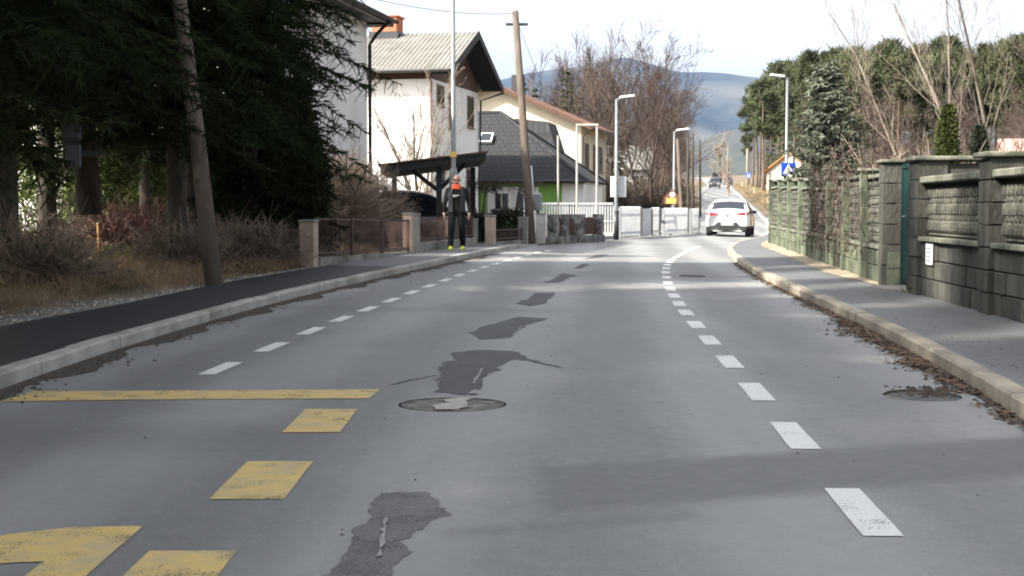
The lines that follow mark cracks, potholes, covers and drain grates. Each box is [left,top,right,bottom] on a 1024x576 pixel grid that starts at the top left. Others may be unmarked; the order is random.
manhole cover [883,389,965,401]
manhole cover [398,397,506,412]
